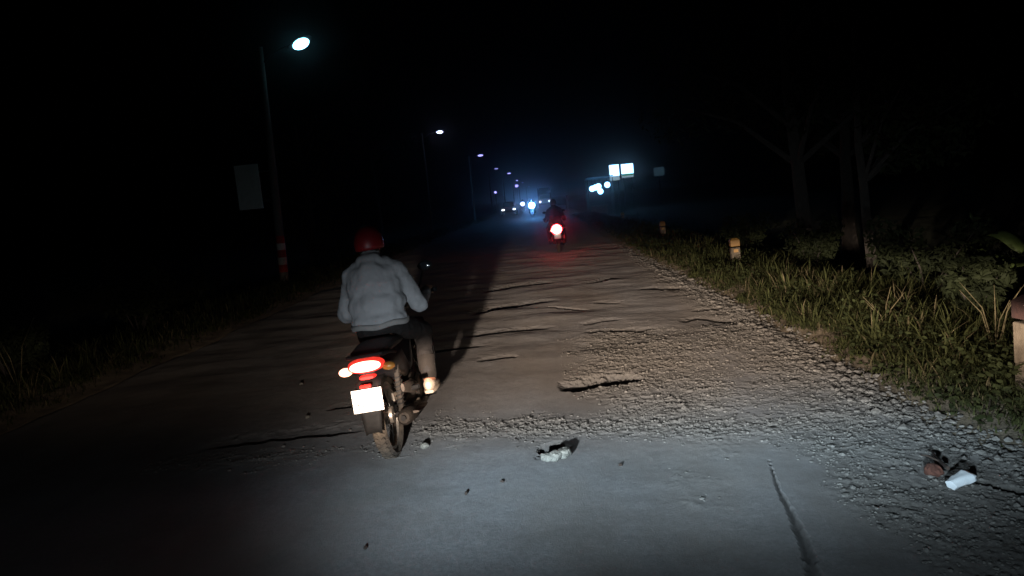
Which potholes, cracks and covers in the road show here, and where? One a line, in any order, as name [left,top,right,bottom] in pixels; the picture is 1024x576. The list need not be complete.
crack [435,278,741,362]
crack [199,402,364,450]
pothole [533,440,573,460]
crack [766,459,826,576]
